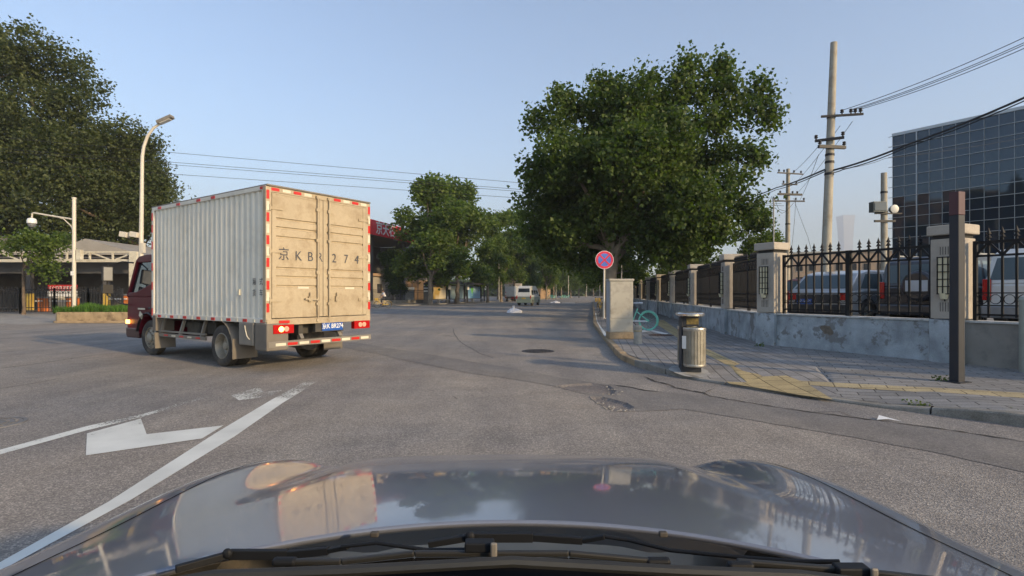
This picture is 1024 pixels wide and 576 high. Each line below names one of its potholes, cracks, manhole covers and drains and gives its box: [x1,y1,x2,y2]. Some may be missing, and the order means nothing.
crack [611,377,1024,442]
pothole [590,397,634,411]
